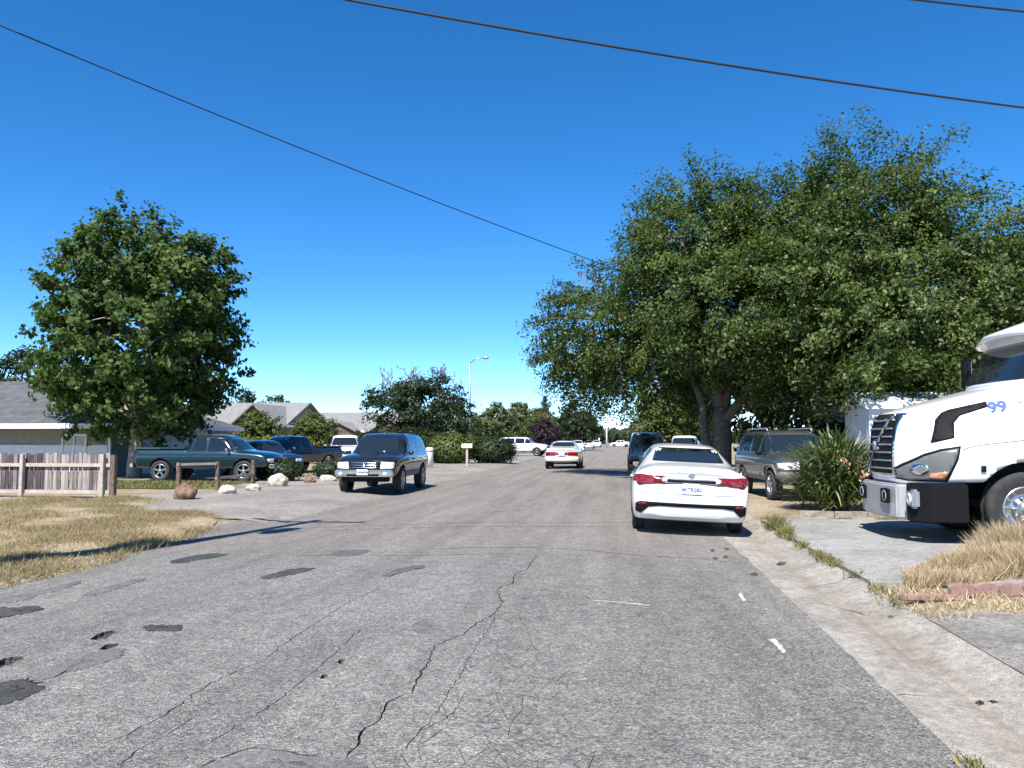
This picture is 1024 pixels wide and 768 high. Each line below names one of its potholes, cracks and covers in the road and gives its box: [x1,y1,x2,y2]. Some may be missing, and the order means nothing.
pothole [91,630,117,641]
crack [97,587,379,767]
crack [288,547,738,768]
